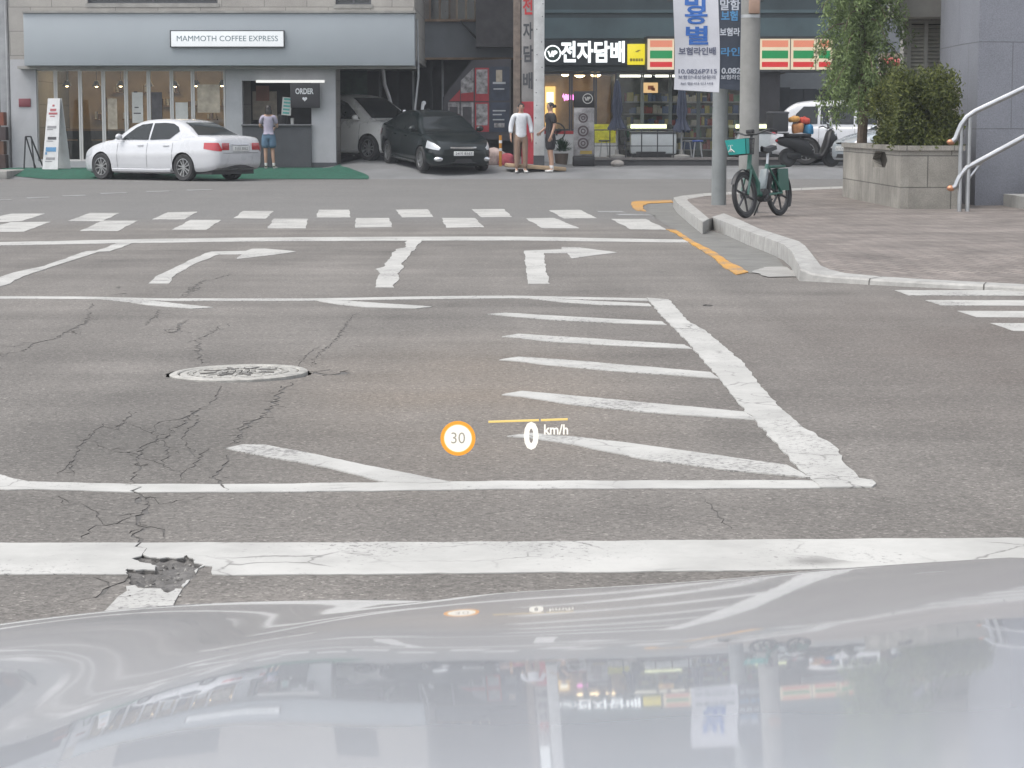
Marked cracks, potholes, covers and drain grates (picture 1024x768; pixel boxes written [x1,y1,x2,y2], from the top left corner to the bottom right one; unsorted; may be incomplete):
crack [0,303,98,356]
crack [79,576,129,601]
crack [57,386,222,547]
crack [146,275,230,364]
manhole cover [169,364,308,390]
pothole [127,555,202,593]
